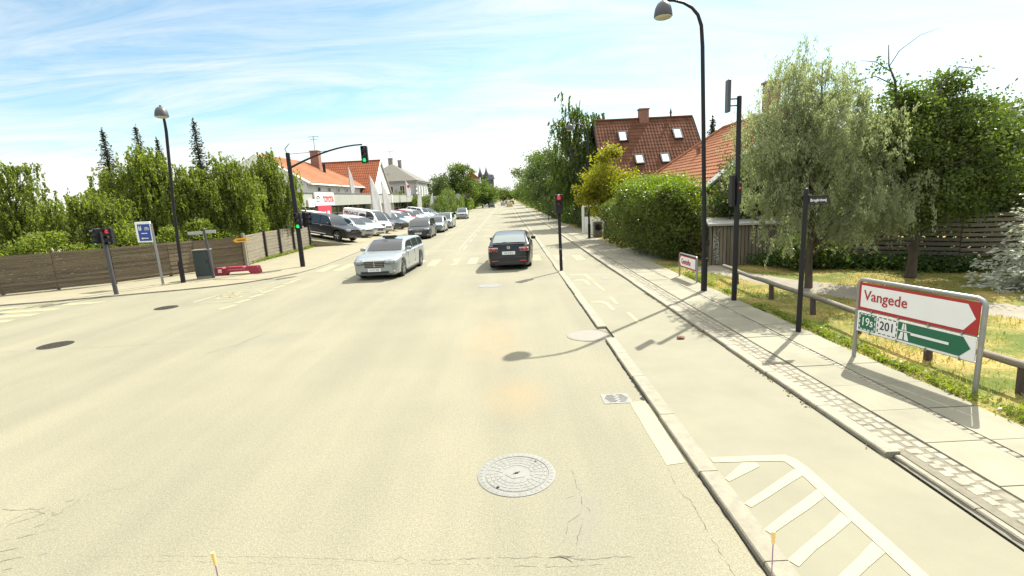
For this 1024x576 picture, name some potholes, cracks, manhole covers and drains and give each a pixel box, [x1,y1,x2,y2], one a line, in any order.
drain grate [600,393,633,404]
manhole cover [567,329,609,341]
manhole cover [36,341,75,350]
manhole cover [478,453,556,497]
crack [0,485,133,570]
